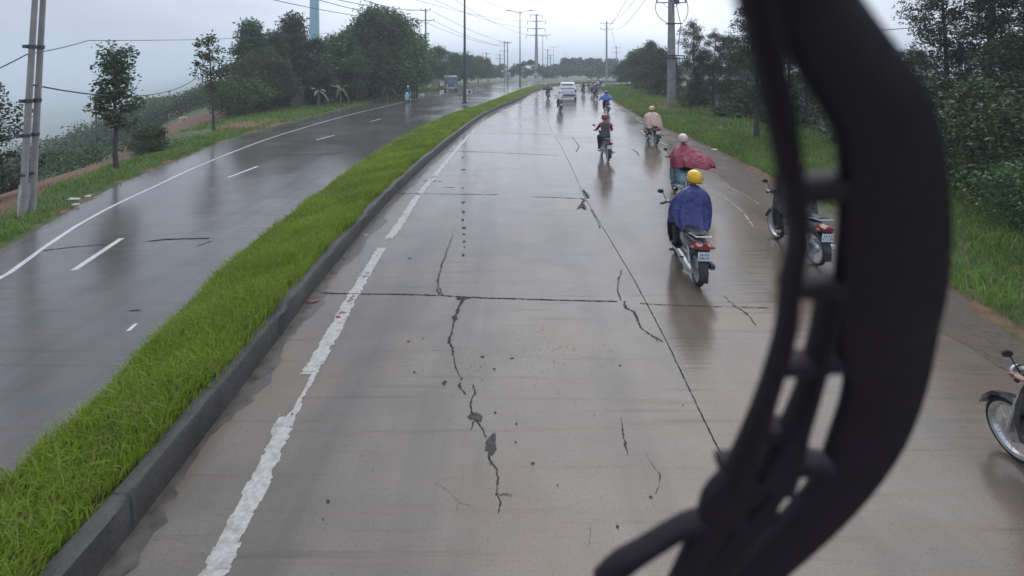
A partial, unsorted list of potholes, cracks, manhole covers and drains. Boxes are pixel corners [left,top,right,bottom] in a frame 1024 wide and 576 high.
crack [436,236,513,513]
crack [577,189,601,228]
crack [617,269,663,342]
